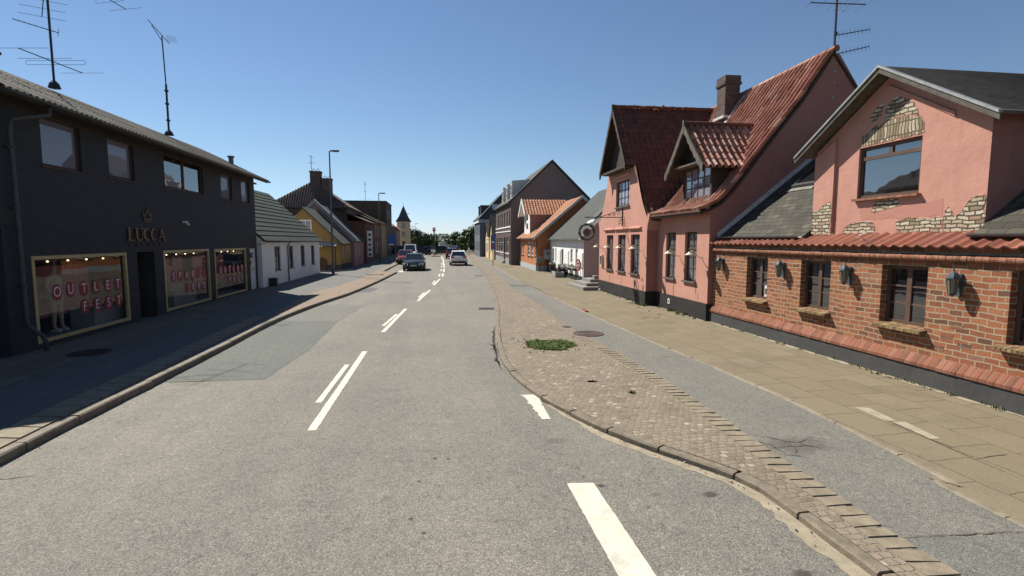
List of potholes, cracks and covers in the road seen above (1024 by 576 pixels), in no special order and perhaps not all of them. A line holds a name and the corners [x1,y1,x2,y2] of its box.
crack [488,328,501,369]
crack [739,430,818,458]
